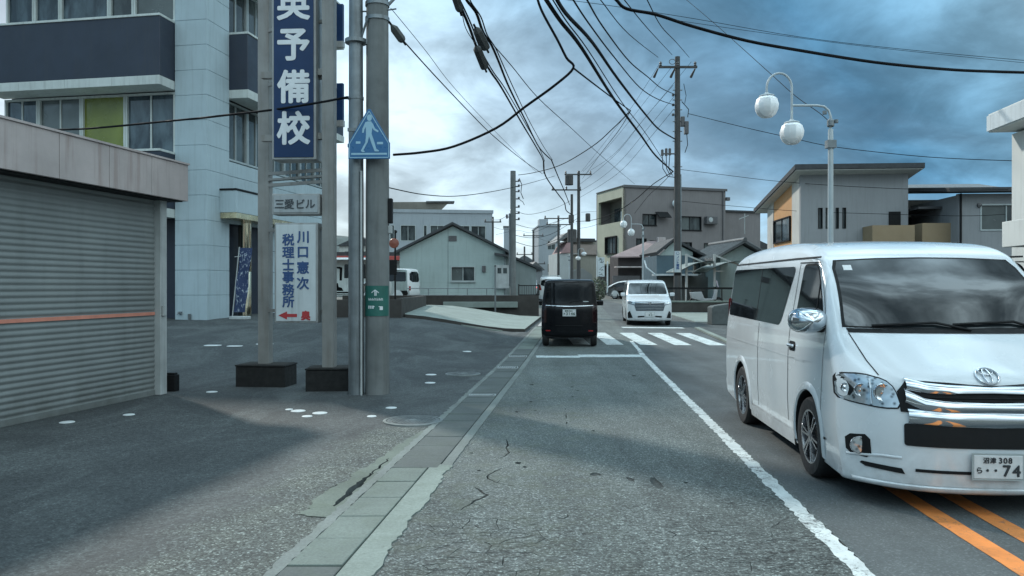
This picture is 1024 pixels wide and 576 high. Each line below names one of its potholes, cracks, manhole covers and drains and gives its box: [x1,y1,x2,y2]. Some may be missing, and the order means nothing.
manhole cover [383,415,443,427]
crack [410,440,569,576]
crack [324,458,389,506]
